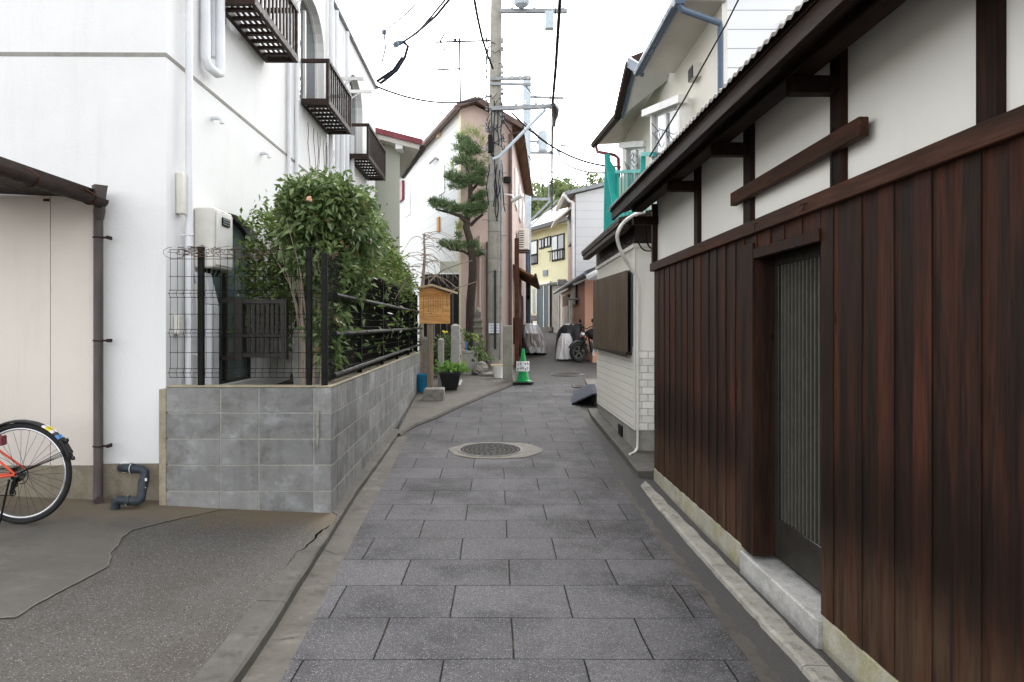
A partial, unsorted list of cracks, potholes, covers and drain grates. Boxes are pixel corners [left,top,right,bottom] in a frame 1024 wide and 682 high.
crack [225,525,342,640]
manhole cover [449,442,543,459]
